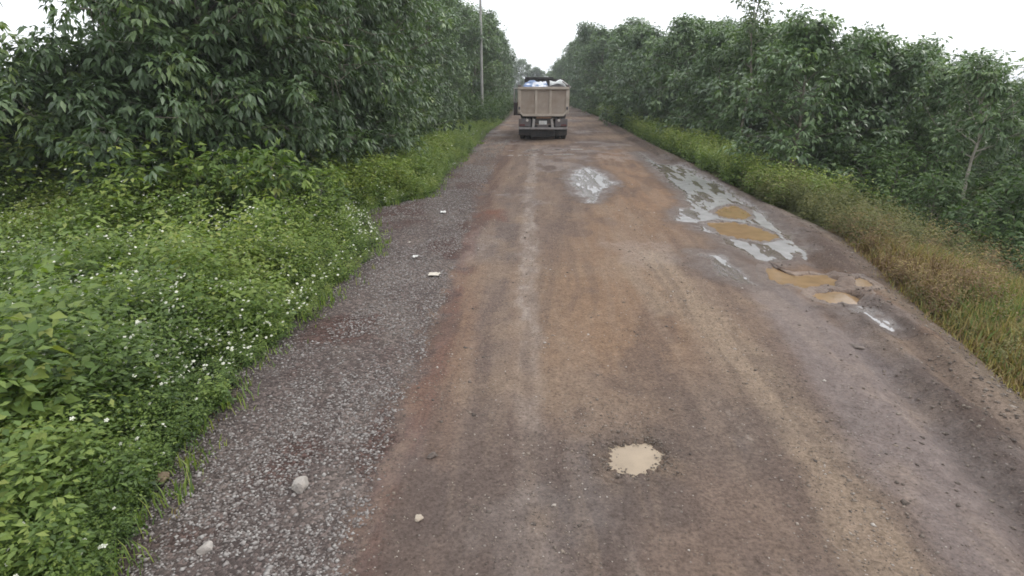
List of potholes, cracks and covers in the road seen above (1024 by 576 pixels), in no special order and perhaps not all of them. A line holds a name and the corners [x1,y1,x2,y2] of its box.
pothole [698,219,787,244]
pothole [800,285,876,308]
pothole [835,273,885,296]
pothole [708,203,756,222]
pothole [756,262,856,293]
